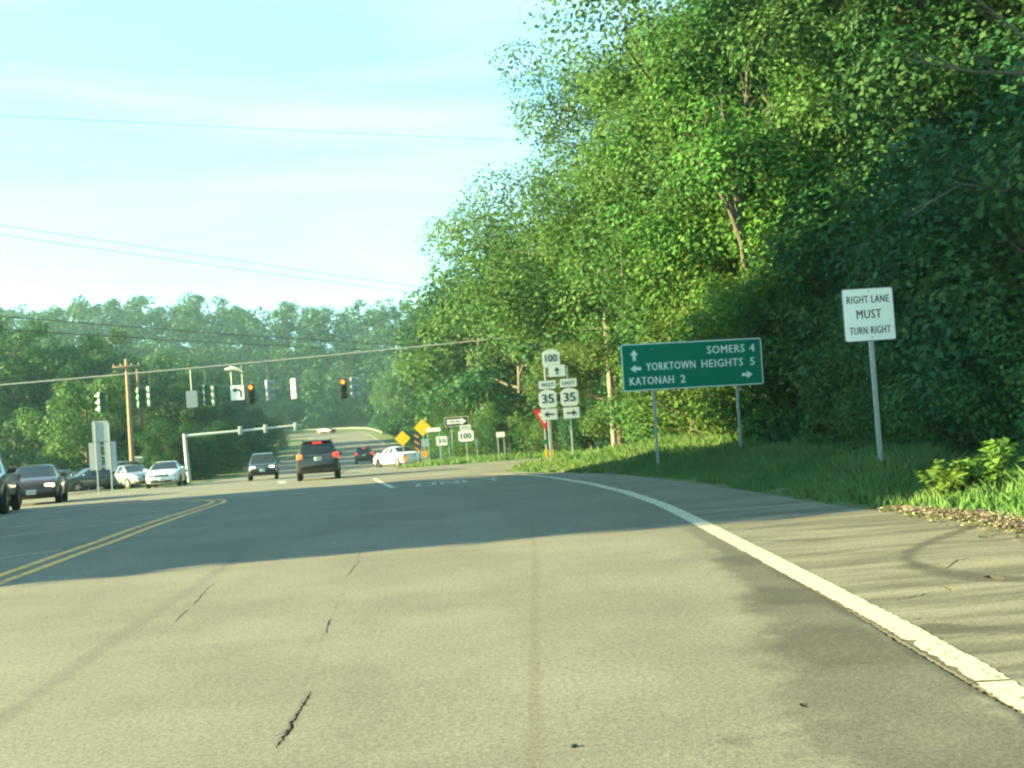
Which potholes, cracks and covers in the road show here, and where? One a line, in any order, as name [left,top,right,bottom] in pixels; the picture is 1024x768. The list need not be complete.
crack [276,691,313,748]
